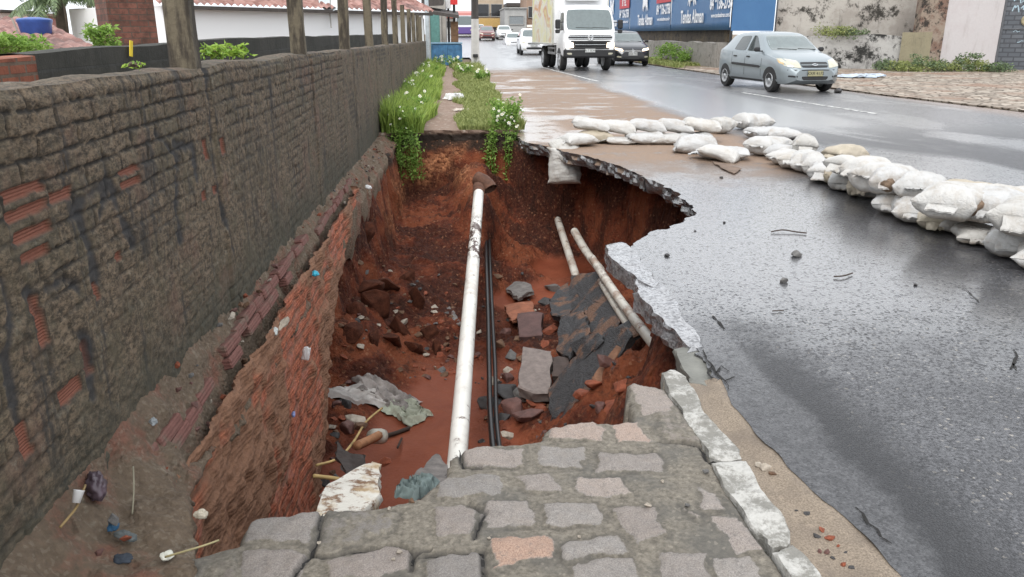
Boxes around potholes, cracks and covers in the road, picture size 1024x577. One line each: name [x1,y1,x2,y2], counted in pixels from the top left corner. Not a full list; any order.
crack [855,507,892,544]
pothole [318,139,688,509]
crack [702,349,735,389]
crack [1010,350,1019,371]
